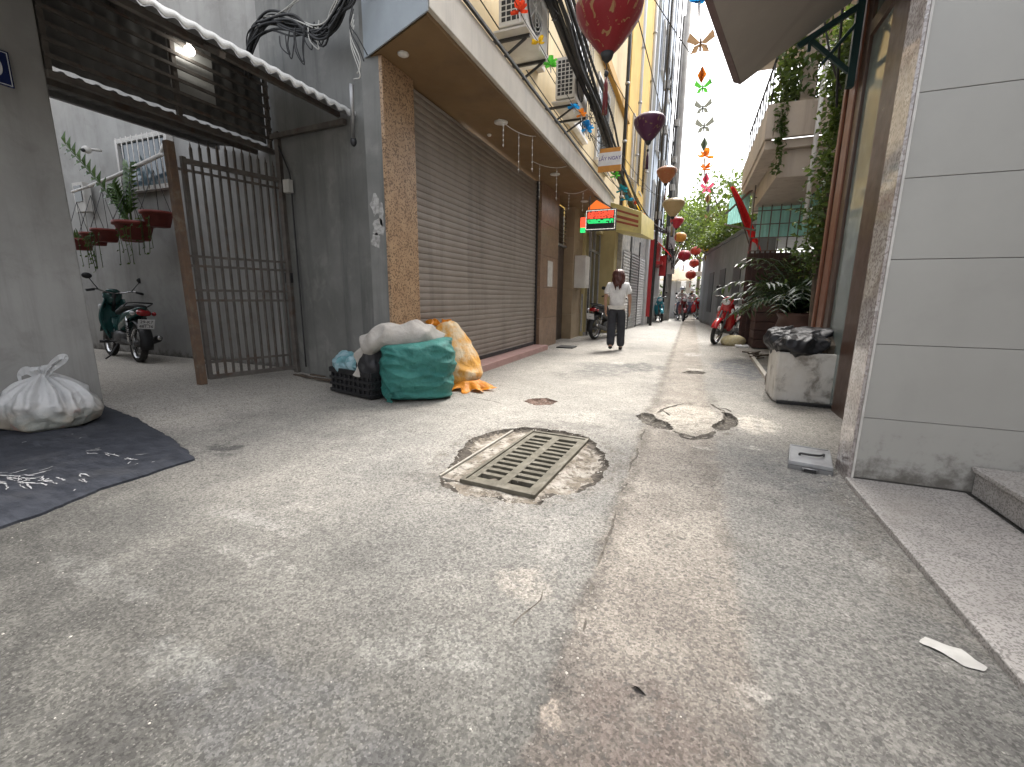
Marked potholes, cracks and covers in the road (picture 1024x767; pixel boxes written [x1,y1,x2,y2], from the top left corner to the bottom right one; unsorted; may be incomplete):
pothole [711,412,738,431]
pothole [636,413,674,430]
crack [583,403,716,631]
drain grate [439,430,589,499]
crack [512,590,543,626]
